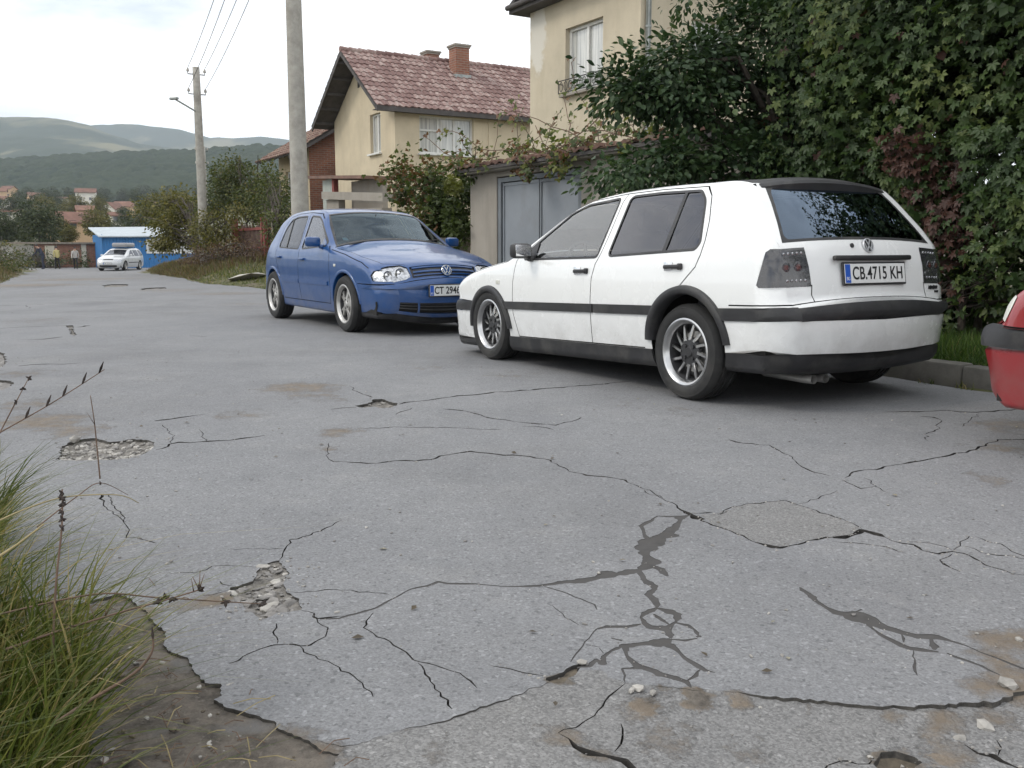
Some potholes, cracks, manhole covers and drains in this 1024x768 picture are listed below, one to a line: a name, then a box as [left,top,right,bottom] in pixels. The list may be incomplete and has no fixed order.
pothole [210,557,321,625]
crack [171,416,1024,768]
crack [99,495,155,543]
pothole [40,436,170,464]
pothole [356,398,398,408]
pothole [871,747,922,768]
